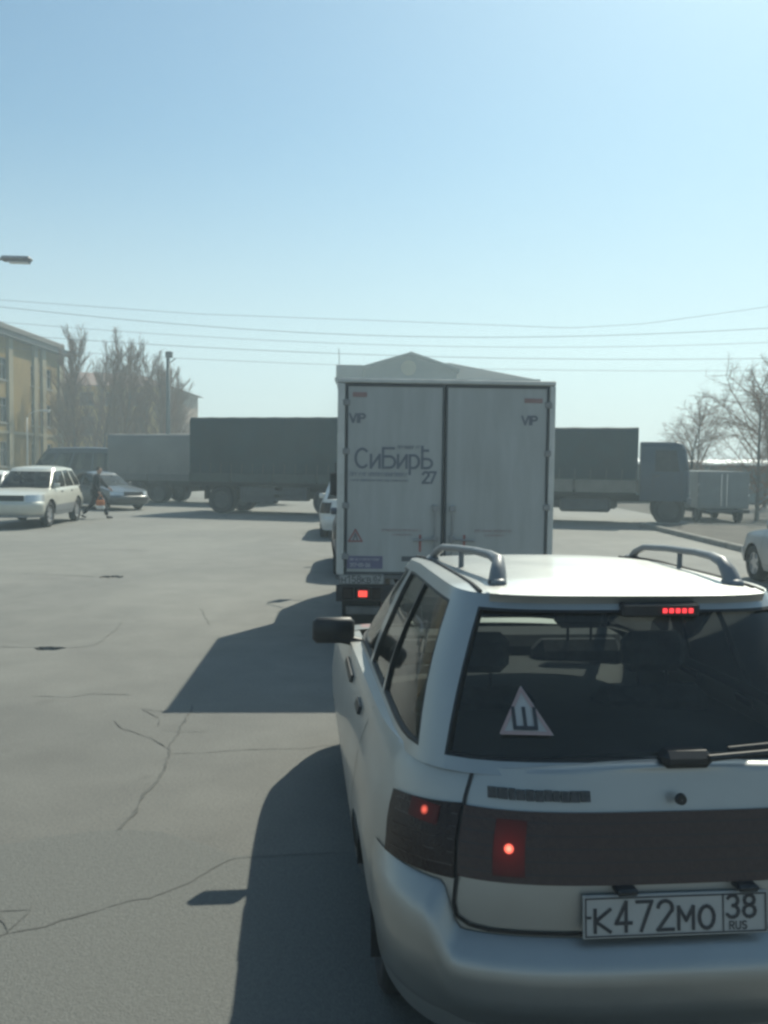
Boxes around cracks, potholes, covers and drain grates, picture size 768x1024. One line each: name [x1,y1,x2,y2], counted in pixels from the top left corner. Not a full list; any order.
crack [0,852,337,936]
crack [61,693,332,830]
